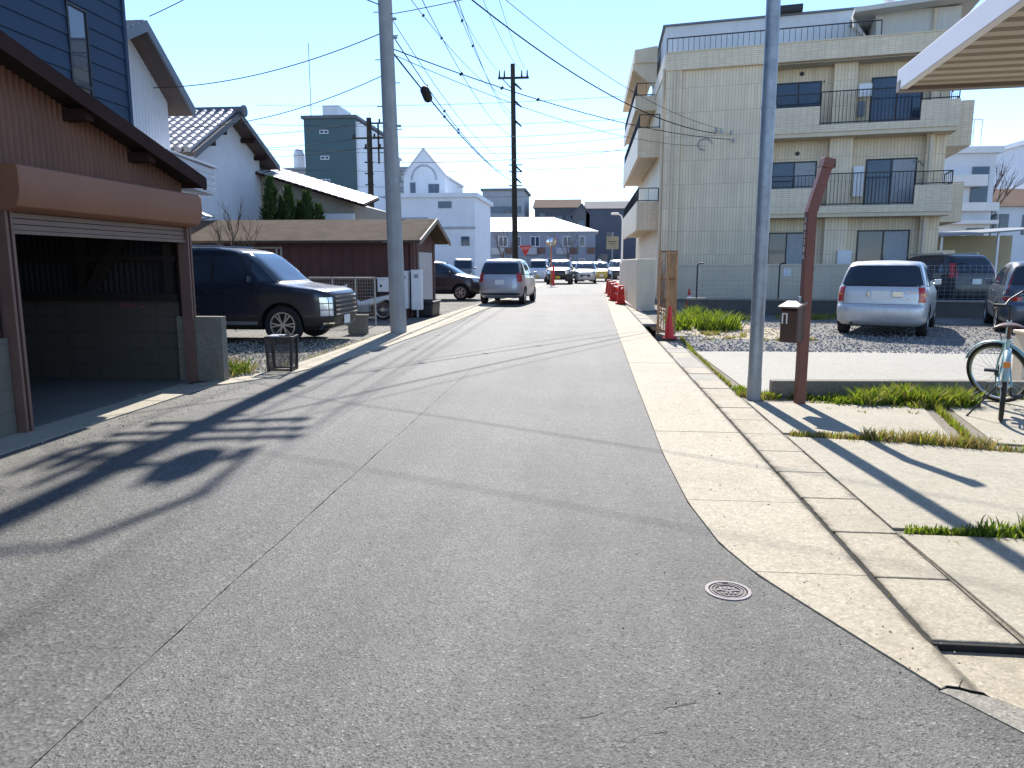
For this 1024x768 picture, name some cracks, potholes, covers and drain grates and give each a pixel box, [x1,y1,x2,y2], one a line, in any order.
manhole cover [705,581,752,601]
crack [939,680,1024,710]
